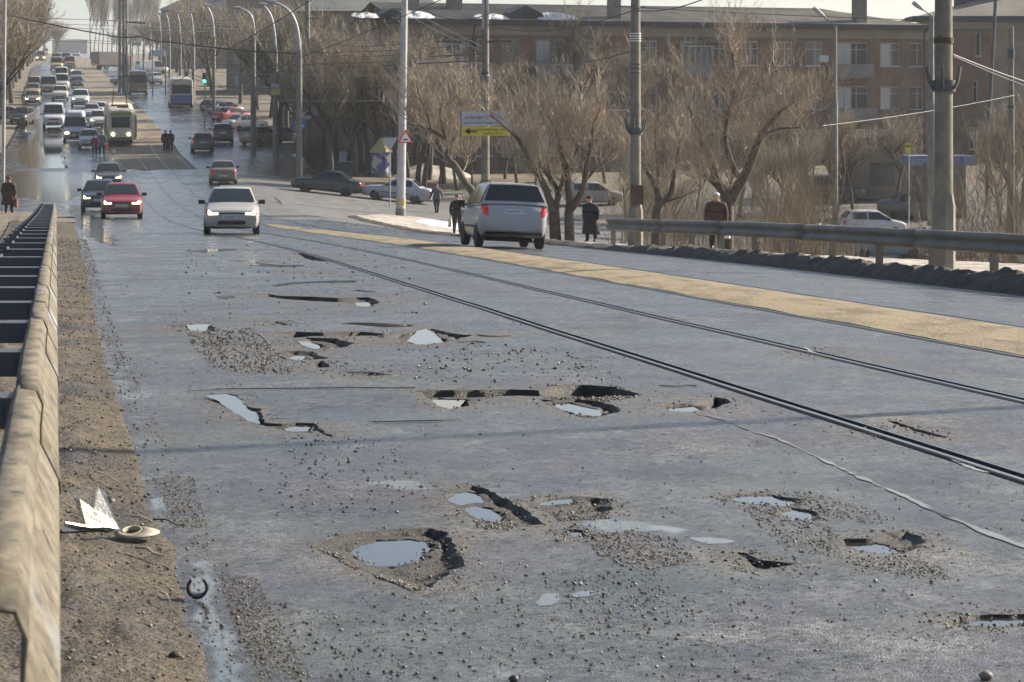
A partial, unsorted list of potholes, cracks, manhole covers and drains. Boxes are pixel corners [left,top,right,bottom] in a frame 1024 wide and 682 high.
pothole [537,398,621,418]
pothole [657,397,731,412]
pothole [265,294,380,307]
pothole [314,528,465,588]
pothole [443,485,544,527]
pothole [940,614,1024,629]
pothole [527,495,614,518]
pothole [776,508,821,521]
pothole [389,329,470,344]
pothole [830,531,926,555]
pothole [293,338,355,349]
pothole [732,552,797,570]
